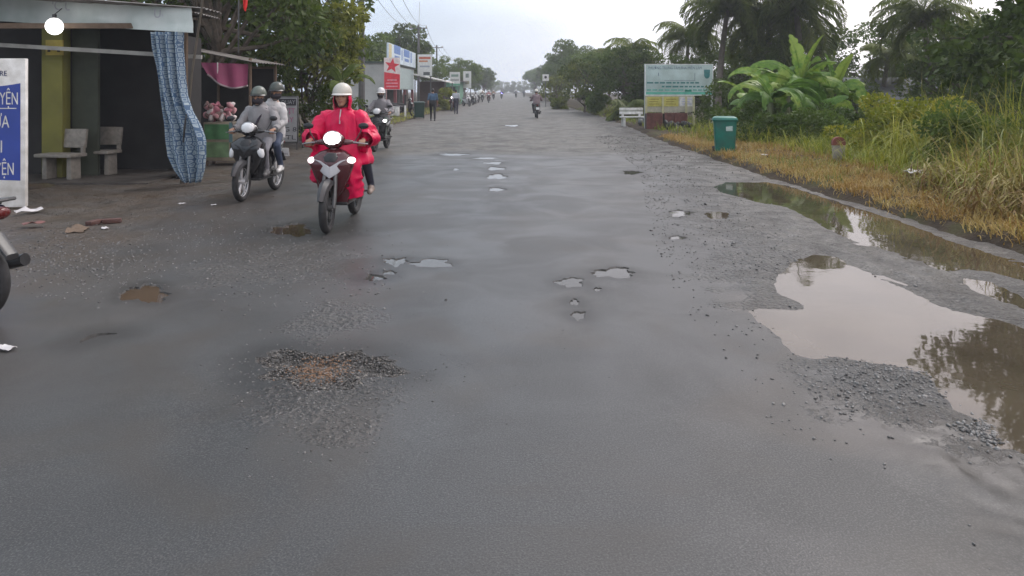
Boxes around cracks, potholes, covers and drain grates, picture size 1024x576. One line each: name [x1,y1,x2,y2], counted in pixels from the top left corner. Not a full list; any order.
pothole [118,283,173,303]
pothole [570,311,586,321]
pothole [591,266,636,278]
pothole [383,257,409,267]
pothole [255,349,411,392]
pothole [407,258,453,267]
pothole [552,277,584,287]
pothole [669,209,696,217]
pothole [268,222,313,237]
